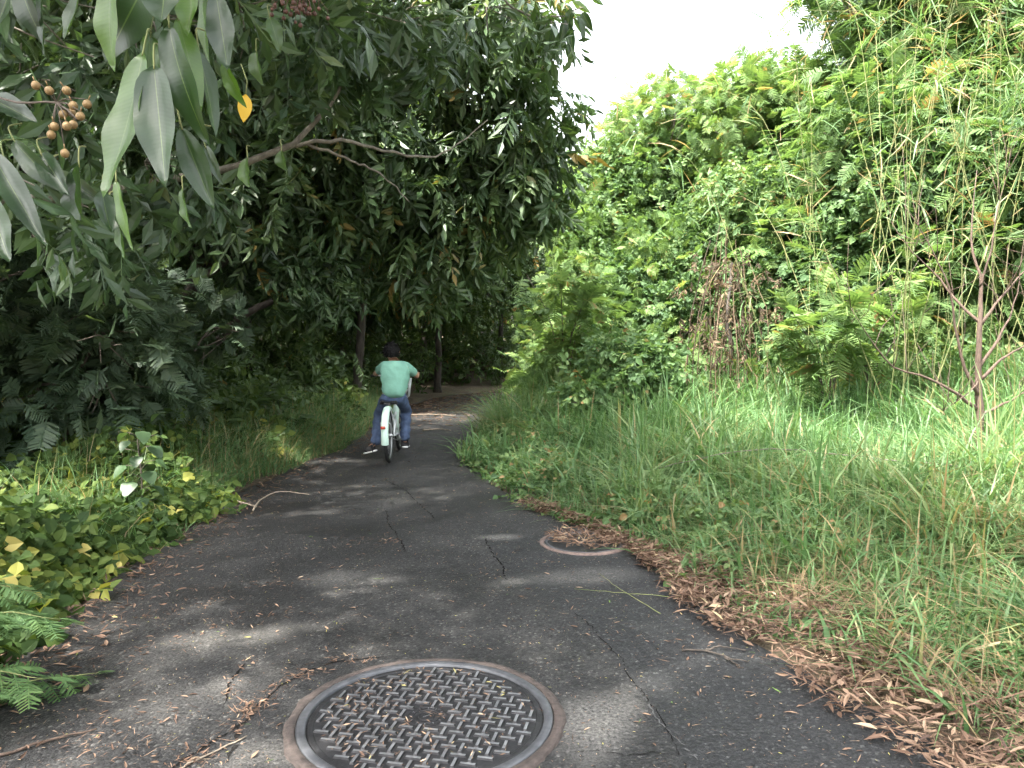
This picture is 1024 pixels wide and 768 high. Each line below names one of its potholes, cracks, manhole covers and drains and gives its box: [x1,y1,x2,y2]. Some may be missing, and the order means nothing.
manhole cover [282,658,567,768]
manhole cover [540,531,629,556]
